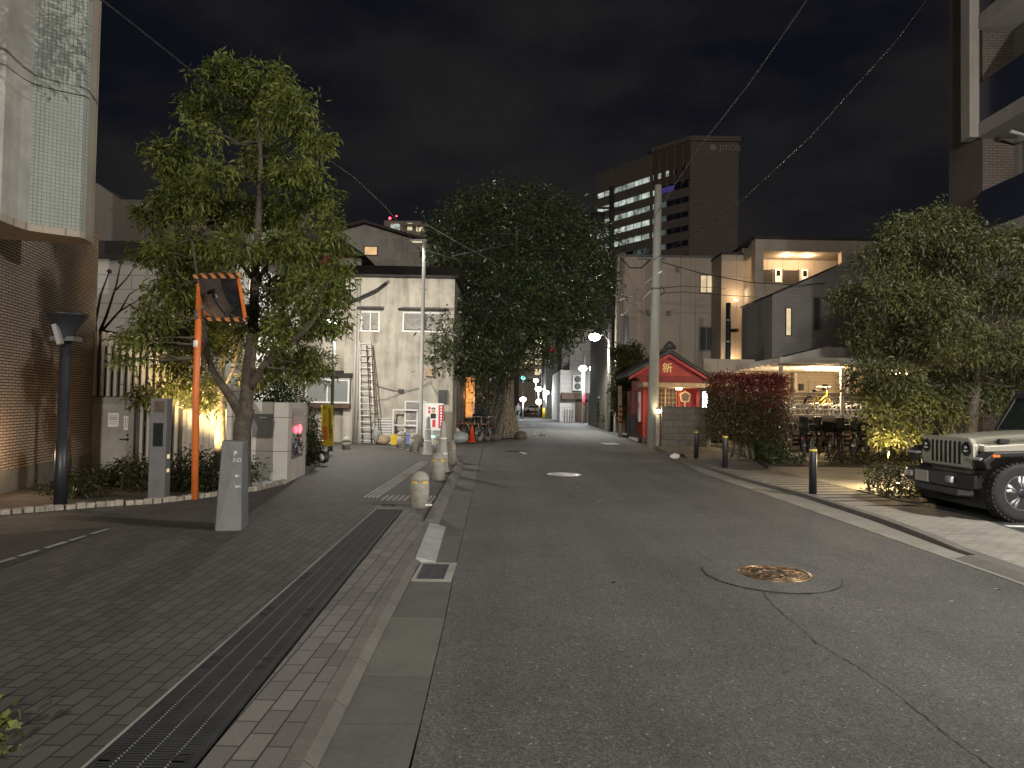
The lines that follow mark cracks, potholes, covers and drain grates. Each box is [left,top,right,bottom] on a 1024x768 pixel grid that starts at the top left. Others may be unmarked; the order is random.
crack [696,551,993,768]
manhole cover [737,565,813,583]
drain grate [411,562,457,582]
